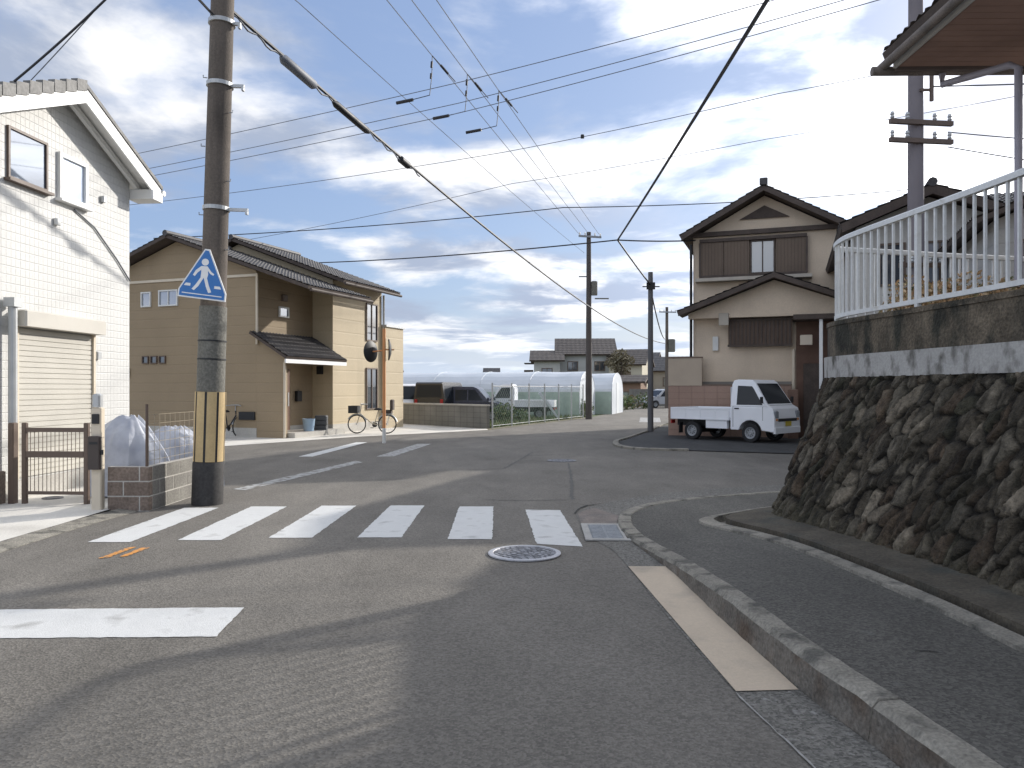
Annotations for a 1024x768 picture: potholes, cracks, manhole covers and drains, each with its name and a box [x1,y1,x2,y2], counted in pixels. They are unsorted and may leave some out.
manhole cover [488,545,561,562]
drain grate [581,523,631,541]
